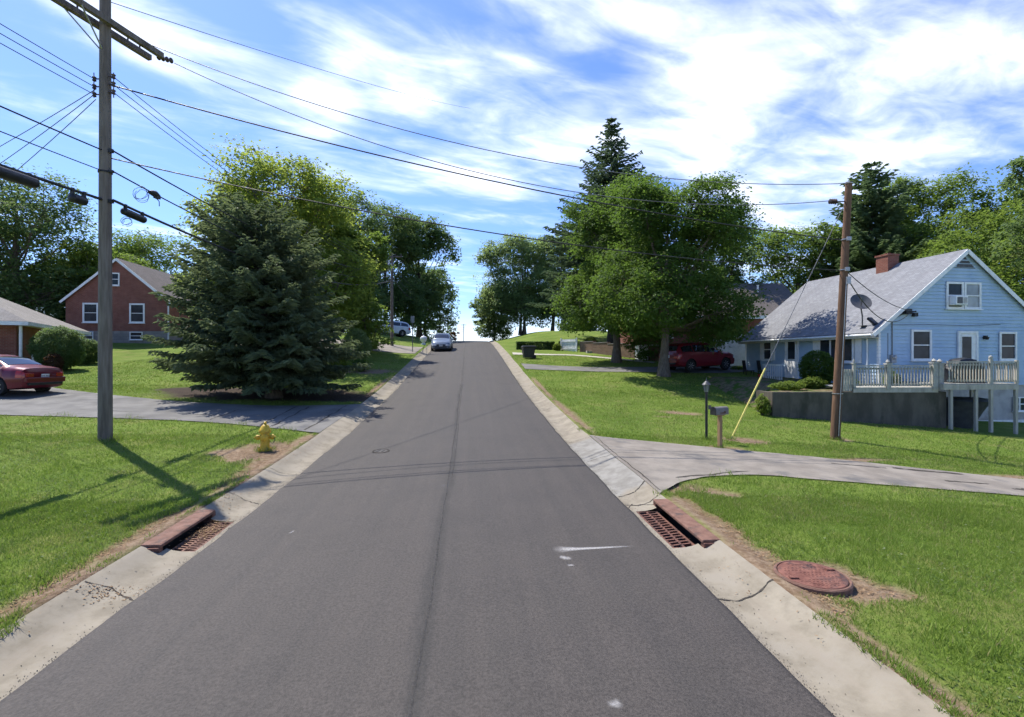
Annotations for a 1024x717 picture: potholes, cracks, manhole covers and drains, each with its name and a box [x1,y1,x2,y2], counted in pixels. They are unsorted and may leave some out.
drain grate [140,509,233,553]
manhole cover [773,560,854,597]
drain grate [637,499,720,548]
